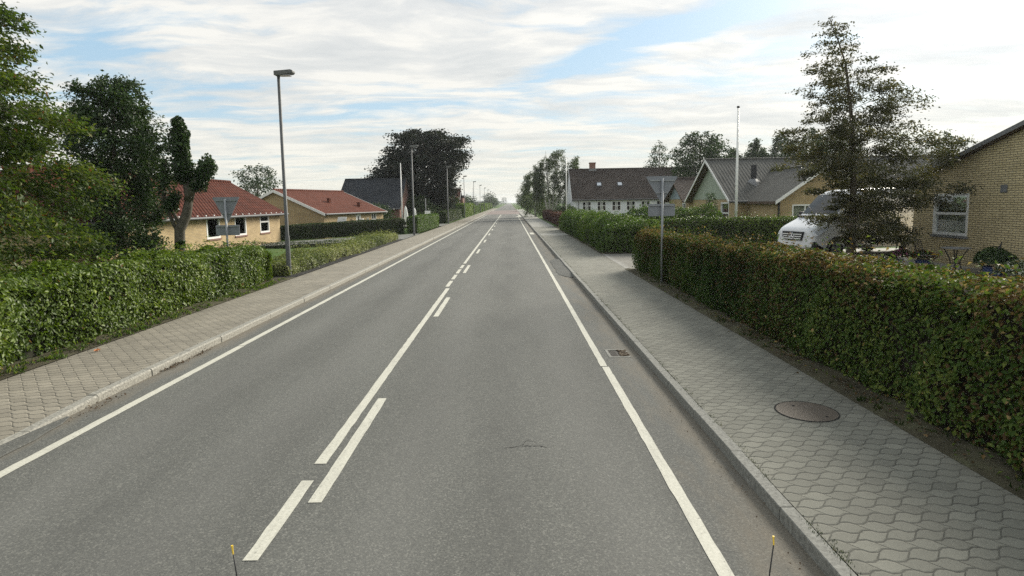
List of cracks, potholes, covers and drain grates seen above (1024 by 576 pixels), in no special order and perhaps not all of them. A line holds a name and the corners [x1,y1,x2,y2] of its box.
manhole cover [774,401,841,422]
drain grate [604,349,631,358]
